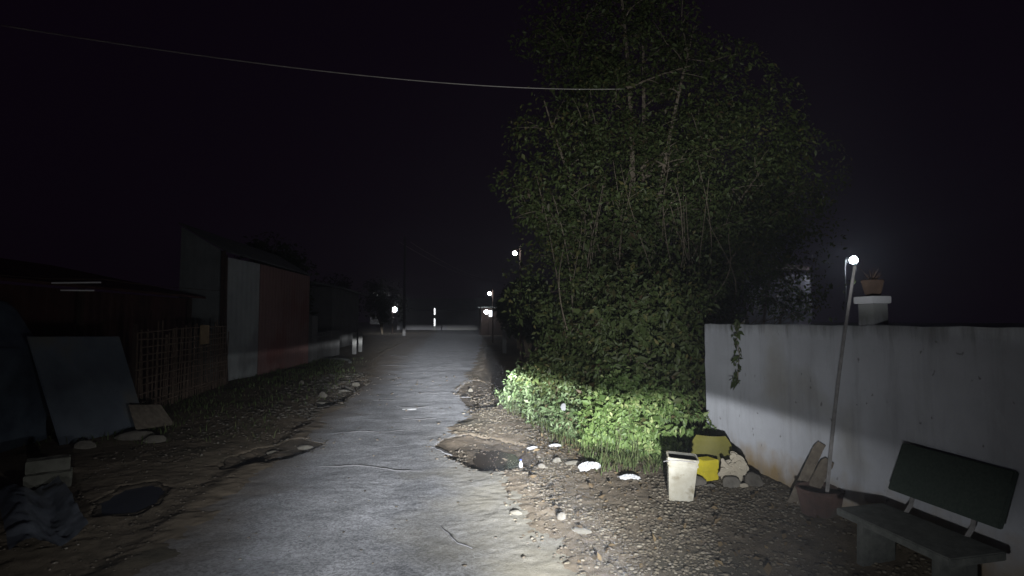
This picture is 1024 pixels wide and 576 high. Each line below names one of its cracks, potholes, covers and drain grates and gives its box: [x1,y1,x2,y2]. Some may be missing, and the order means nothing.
crack [440,526,473,549]
pothole [220,439,320,469]
pothole [92,482,171,517]
pothole [458,381,501,411]
pothole [435,435,539,472]
